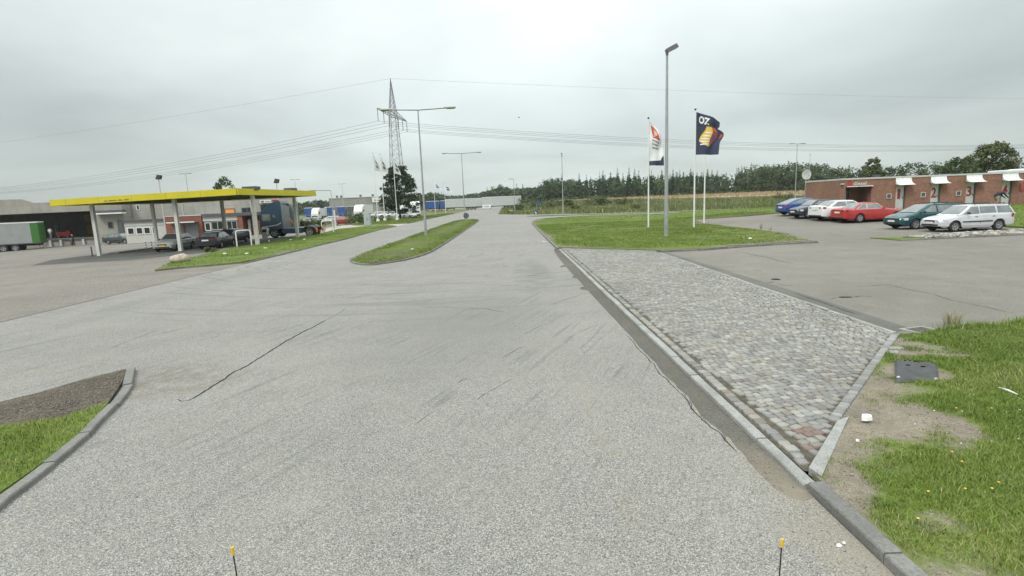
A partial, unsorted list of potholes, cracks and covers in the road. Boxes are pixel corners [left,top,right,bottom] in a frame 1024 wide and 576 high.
crack [625,334,730,445]
crack [178,314,337,401]
